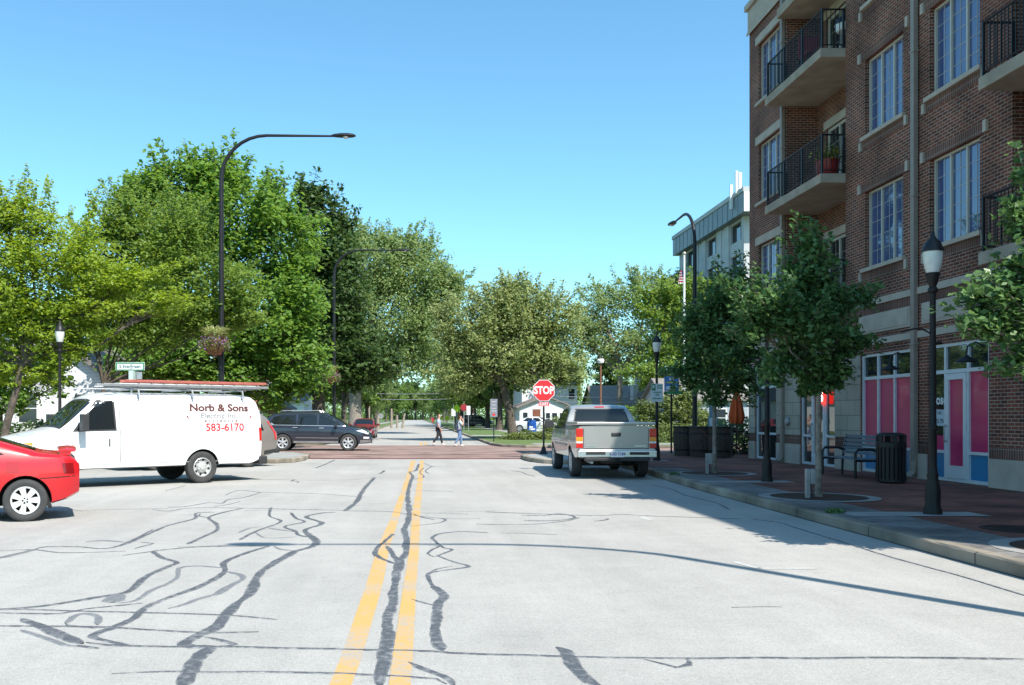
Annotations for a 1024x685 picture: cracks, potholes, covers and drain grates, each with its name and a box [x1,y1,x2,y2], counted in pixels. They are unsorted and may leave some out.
crack [62,485,261,513]
